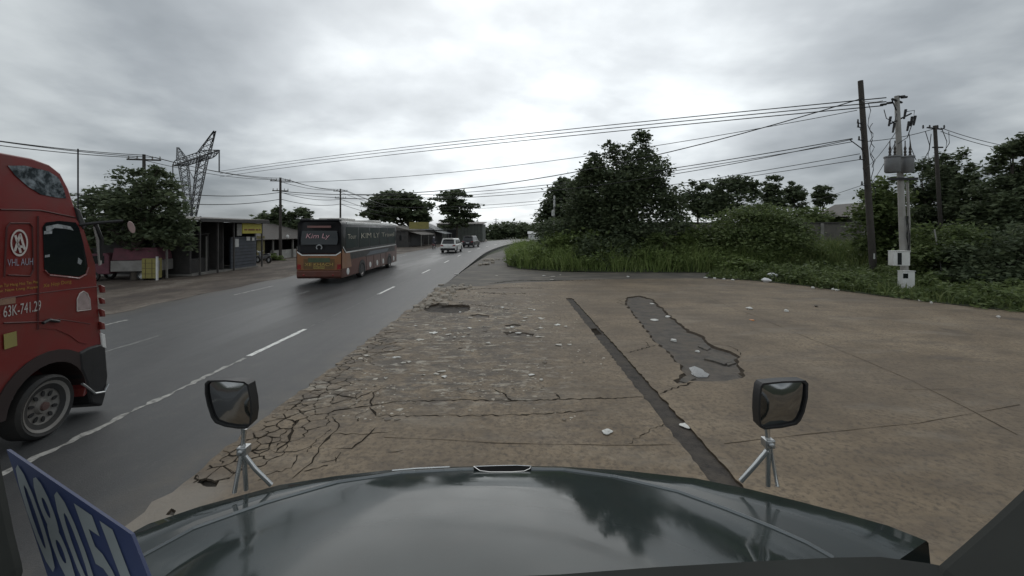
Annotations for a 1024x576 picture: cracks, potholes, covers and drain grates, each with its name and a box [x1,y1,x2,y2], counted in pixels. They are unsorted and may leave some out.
crack [194,330,627,482]
pothole [424,303,470,313]
